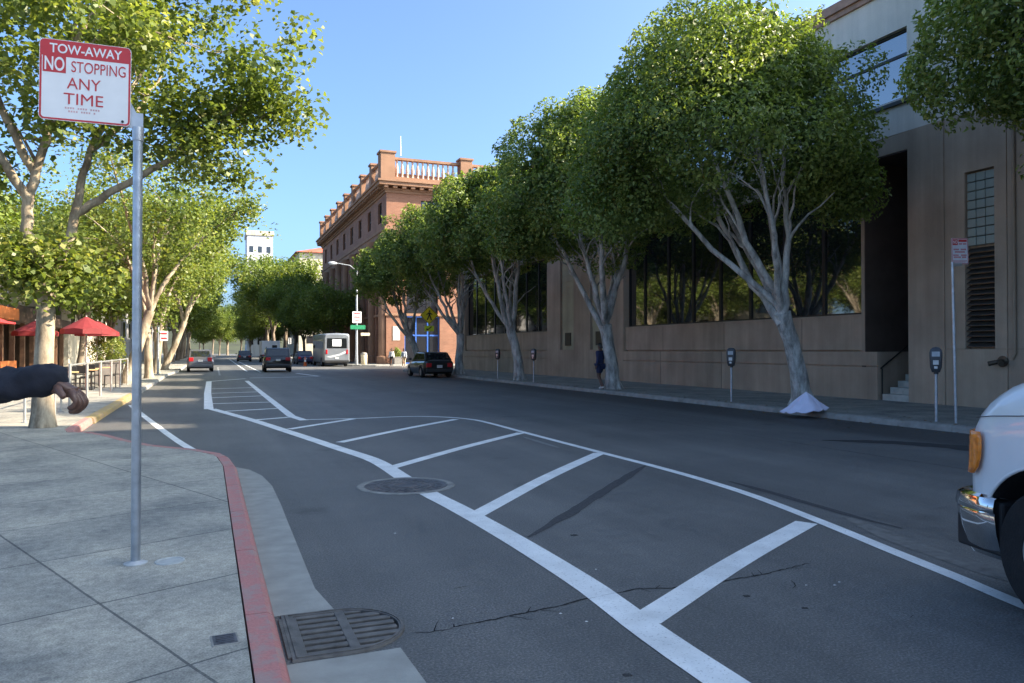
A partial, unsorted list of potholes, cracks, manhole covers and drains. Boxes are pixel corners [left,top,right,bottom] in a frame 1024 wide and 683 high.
manhole cover [357,477,455,495]
crack [432,563,811,632]
drain grate [278,608,405,663]
